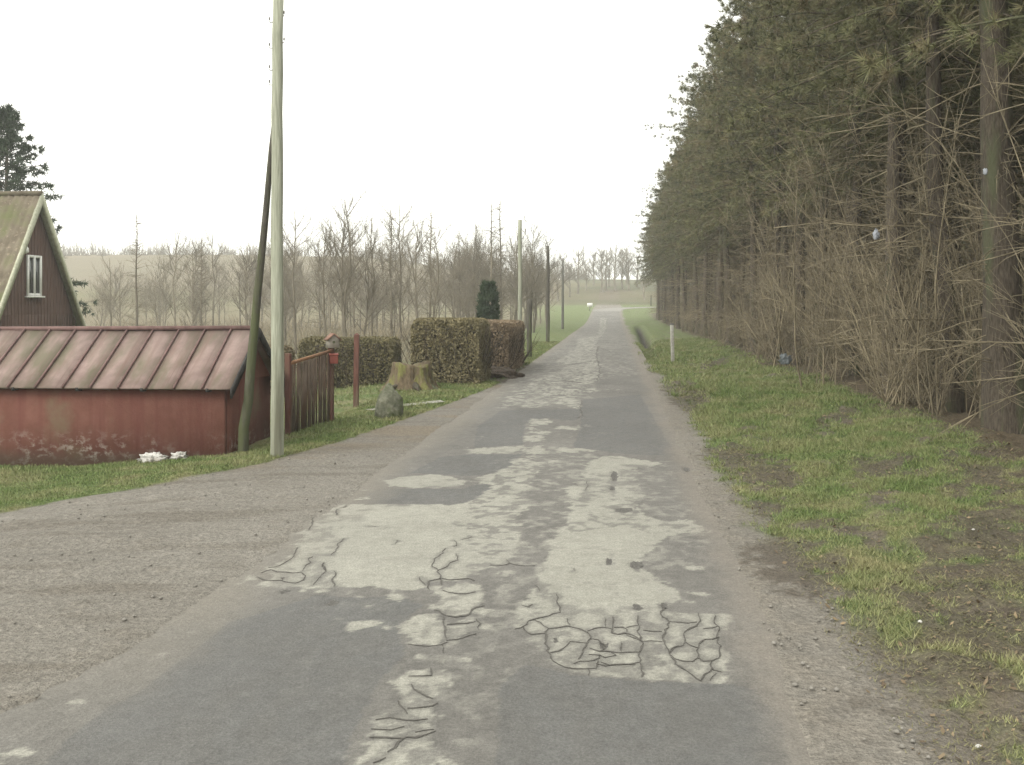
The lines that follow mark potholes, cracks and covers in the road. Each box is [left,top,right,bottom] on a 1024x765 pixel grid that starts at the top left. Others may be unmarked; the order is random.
crack [258,539,343,587]
crack [515,585,722,681]
crack [369,537,484,763]
